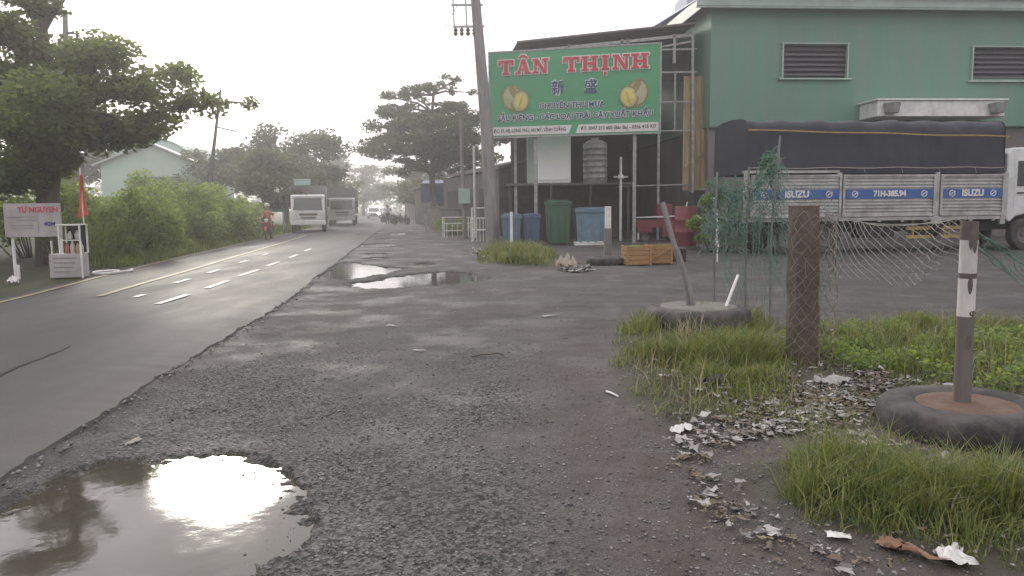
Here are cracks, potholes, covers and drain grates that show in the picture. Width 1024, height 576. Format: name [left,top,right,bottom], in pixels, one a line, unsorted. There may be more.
pothole [0,445,342,576]
pothole [337,270,494,290]
crack [0,346,69,375]
pothole [316,261,412,282]
